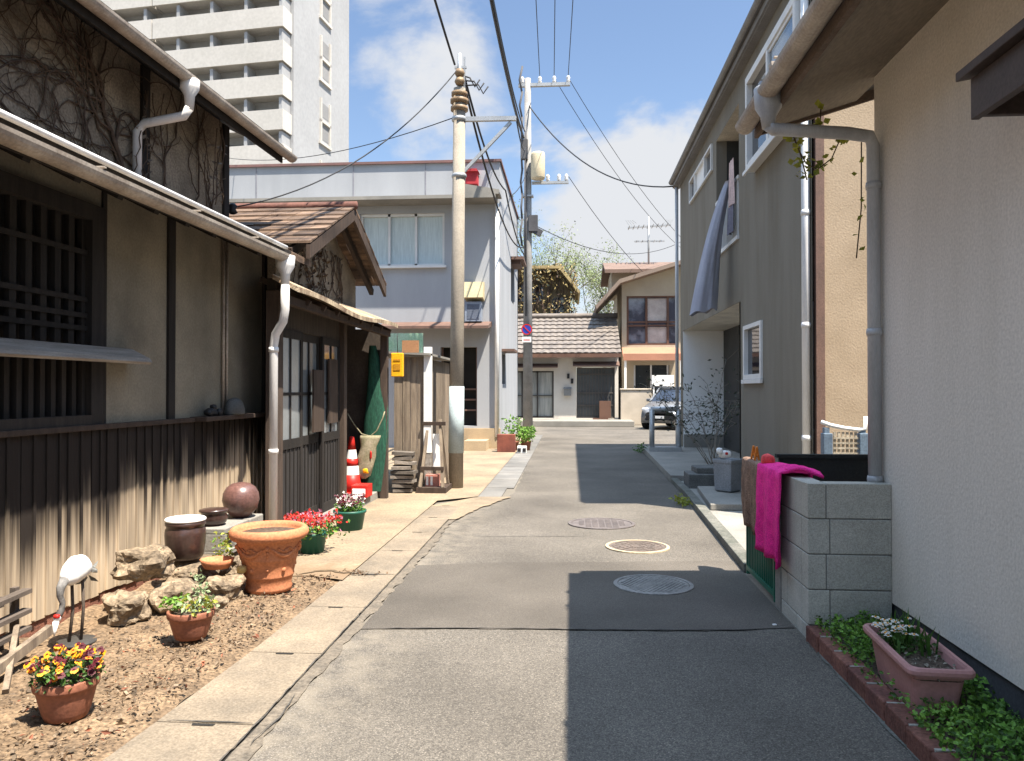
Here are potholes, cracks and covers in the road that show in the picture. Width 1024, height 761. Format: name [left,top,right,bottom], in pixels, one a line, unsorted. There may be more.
manhole cover [568,518,635,530]
manhole cover [613,574,694,595]
manhole cover [605,540,670,554]
